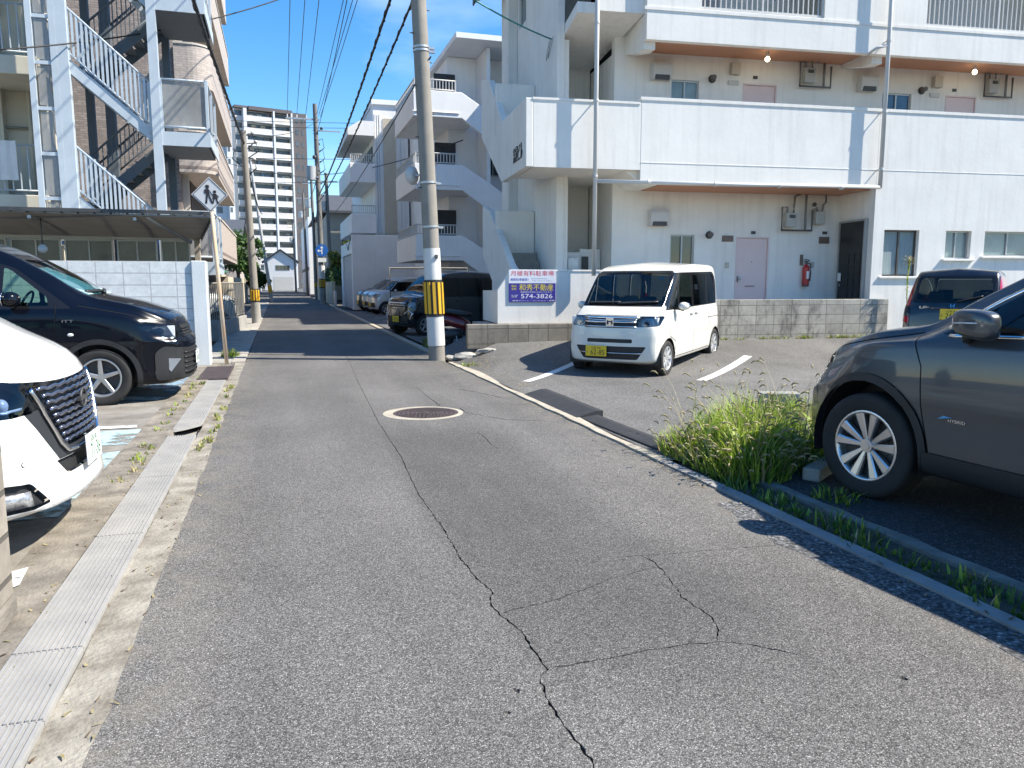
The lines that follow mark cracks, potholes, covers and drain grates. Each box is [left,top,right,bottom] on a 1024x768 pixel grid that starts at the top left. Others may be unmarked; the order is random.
crack [345,354,802,768]
manhole cover [383,406,463,420]
